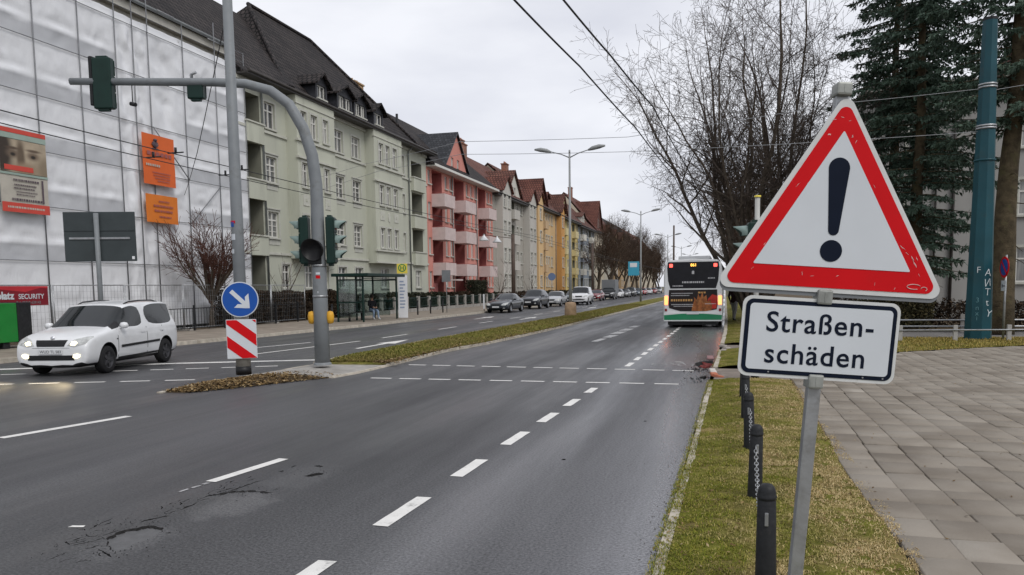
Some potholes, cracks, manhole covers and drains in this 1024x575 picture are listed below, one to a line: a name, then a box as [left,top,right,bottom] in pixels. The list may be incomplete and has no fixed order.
pothole [106,525,164,552]
crack [51,519,115,563]
pothole [695,360,713,369]
crack [141,476,273,522]
